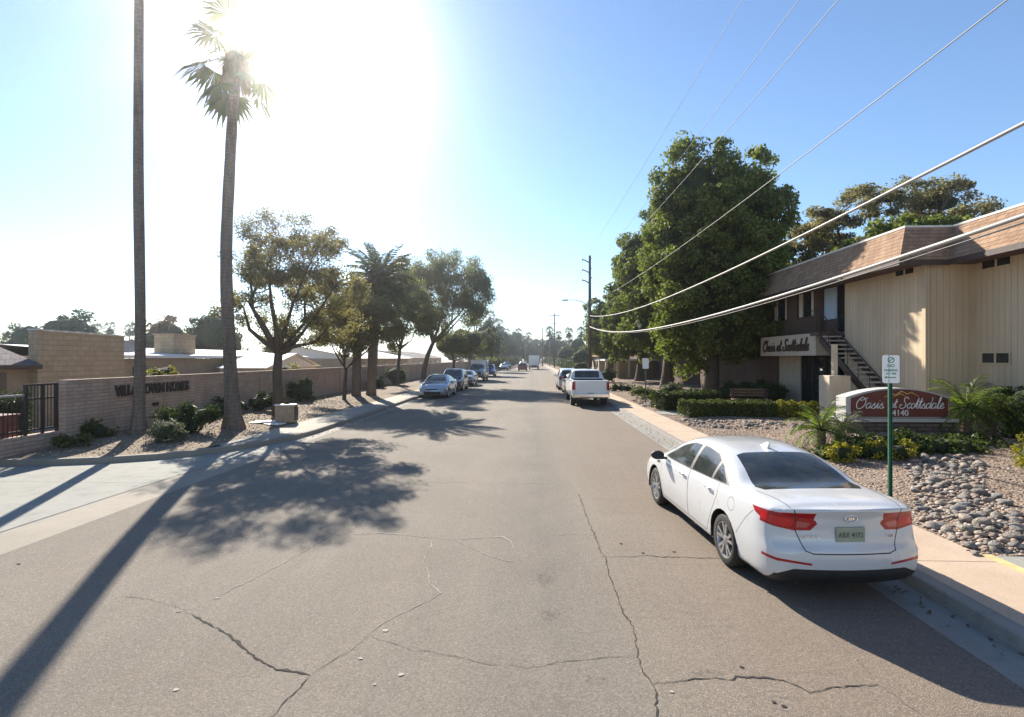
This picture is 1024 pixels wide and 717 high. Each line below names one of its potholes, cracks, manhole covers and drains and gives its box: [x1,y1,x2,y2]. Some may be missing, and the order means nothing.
crack [126,493,922,717]
